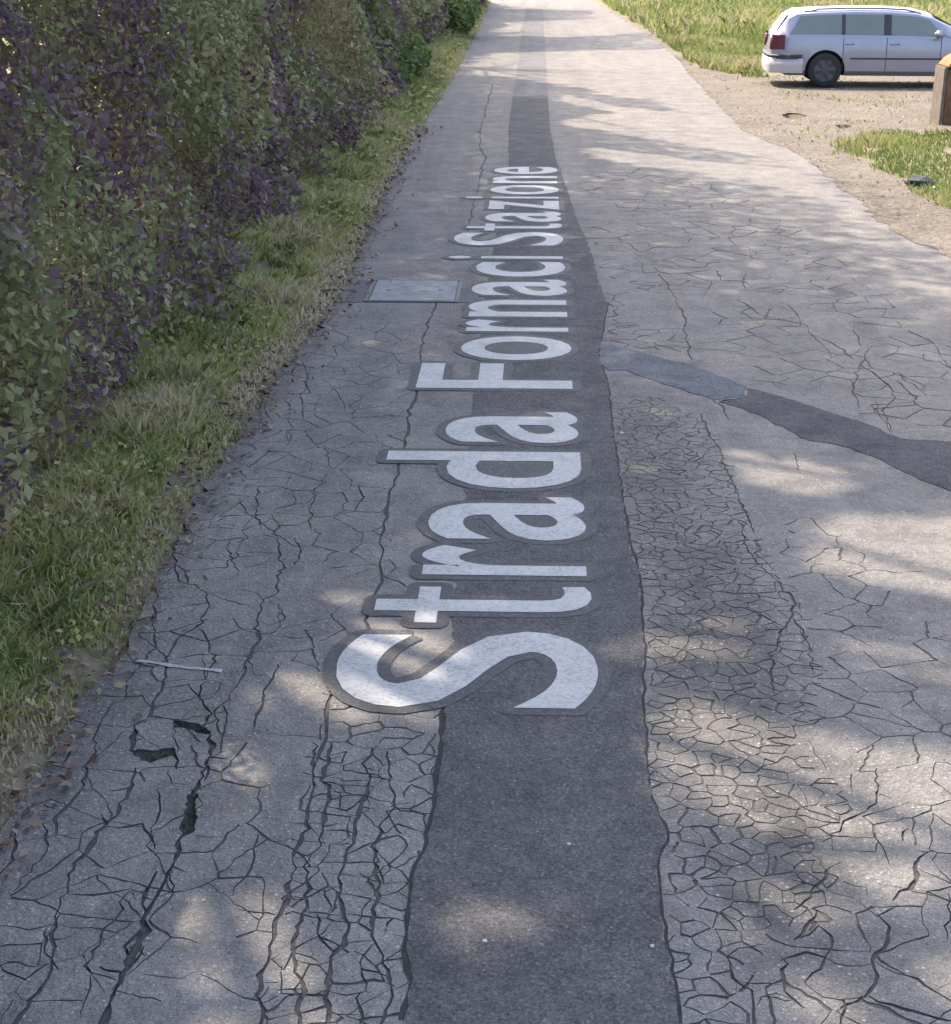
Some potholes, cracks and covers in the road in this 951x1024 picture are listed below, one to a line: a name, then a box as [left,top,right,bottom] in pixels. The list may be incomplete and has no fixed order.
crack [0,304,439,1024]
manhole cover [342,279,479,304]
pothole [132,747,177,763]
crack [467,84,493,231]
crack [701,275,951,474]
pothole [179,794,198,836]
pothole [173,720,211,735]
crack [578,168,848,352]
crack [613,396,951,1024]
